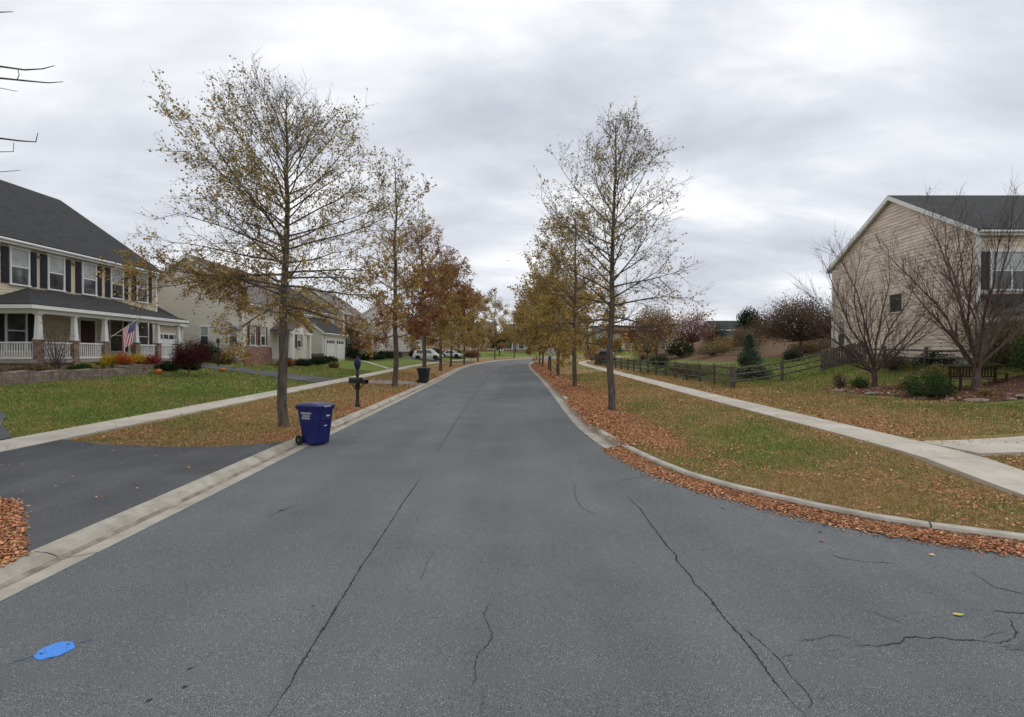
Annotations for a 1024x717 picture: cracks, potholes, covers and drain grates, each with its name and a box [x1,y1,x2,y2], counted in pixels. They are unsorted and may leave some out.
crack [624,477,1024,714]
crack [470,607,493,714]
